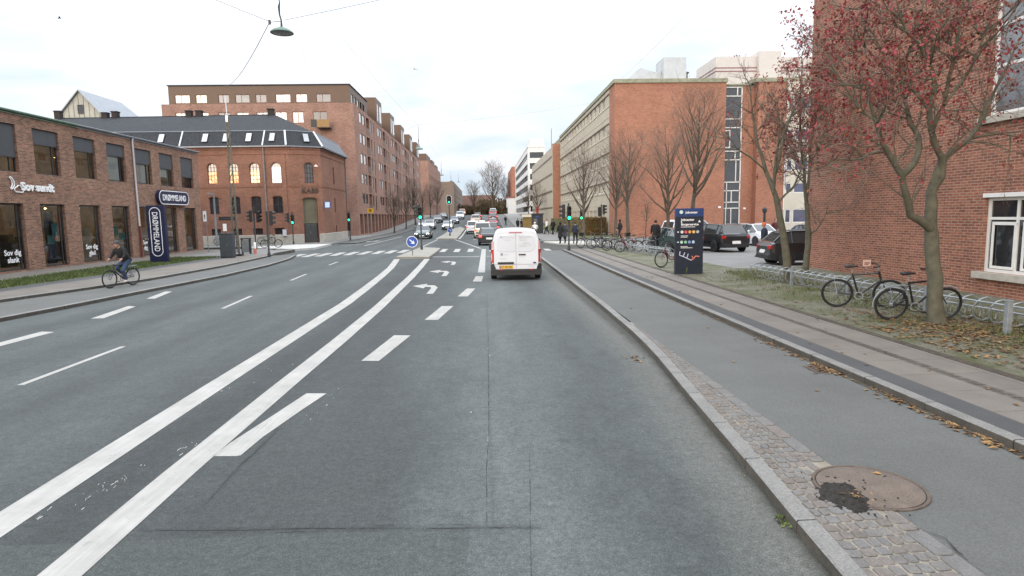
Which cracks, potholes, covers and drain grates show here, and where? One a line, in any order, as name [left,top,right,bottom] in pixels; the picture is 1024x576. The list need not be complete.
manhole cover [811,465,932,512]
